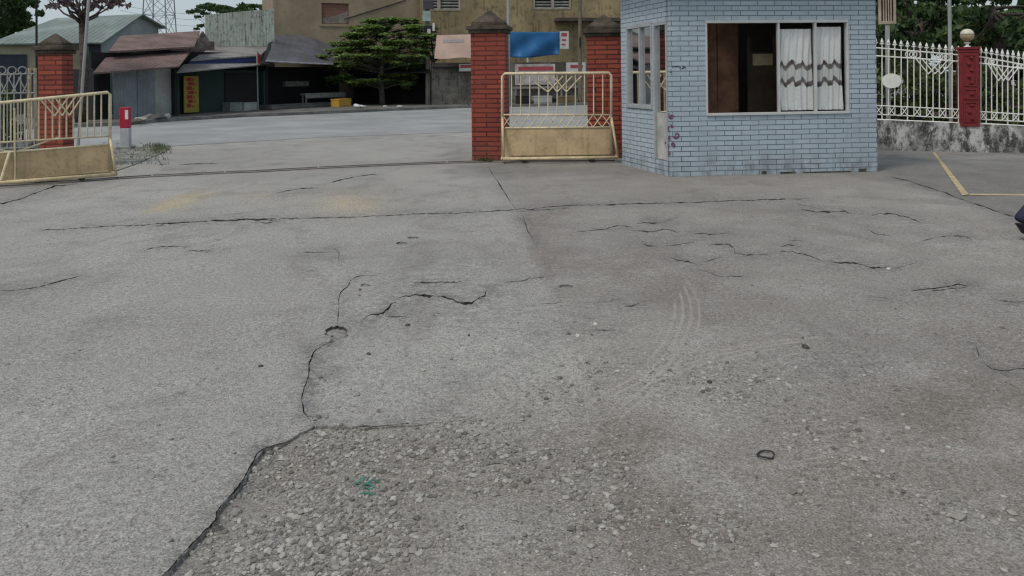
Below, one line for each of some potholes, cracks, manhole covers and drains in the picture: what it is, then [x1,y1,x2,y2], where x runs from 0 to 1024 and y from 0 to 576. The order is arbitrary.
crack [168,442,285,571]
pothole [324,325,349,340]
crack [305,249,373,324]
crack [869,213,972,241]
crack [364,281,487,319]
crack [301,342,328,421]
crack [45,170,914,277]
crack [2,275,81,291]
crack [912,283,969,291]
